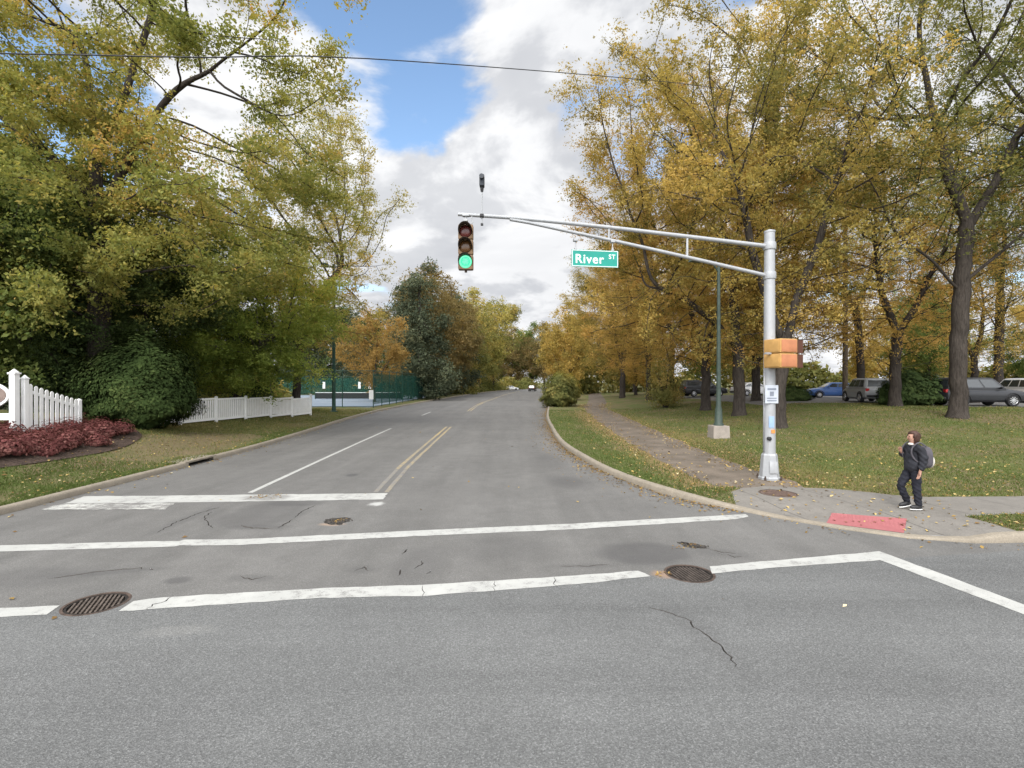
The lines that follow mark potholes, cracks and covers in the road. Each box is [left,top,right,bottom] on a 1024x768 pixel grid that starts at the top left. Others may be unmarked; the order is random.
manhole cover [664,564,716,583]
pothole [324,517,353,525]
pothole [677,541,709,549]
crack [50,567,153,579]
crack [652,608,737,667]
manhole cover [758,489,799,497]
drain grate [170,455,216,466]
